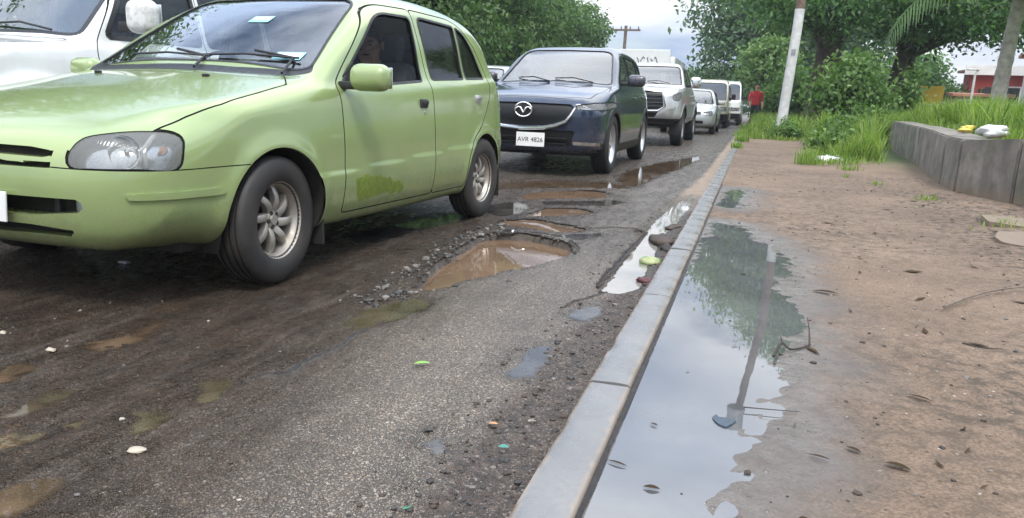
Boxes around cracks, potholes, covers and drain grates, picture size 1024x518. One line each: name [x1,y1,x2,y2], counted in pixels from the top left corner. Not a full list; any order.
pothole [523,190,610,200]
pothole [403,231,576,291]
crack [241,329,368,383]
pothole [499,219,586,232]
